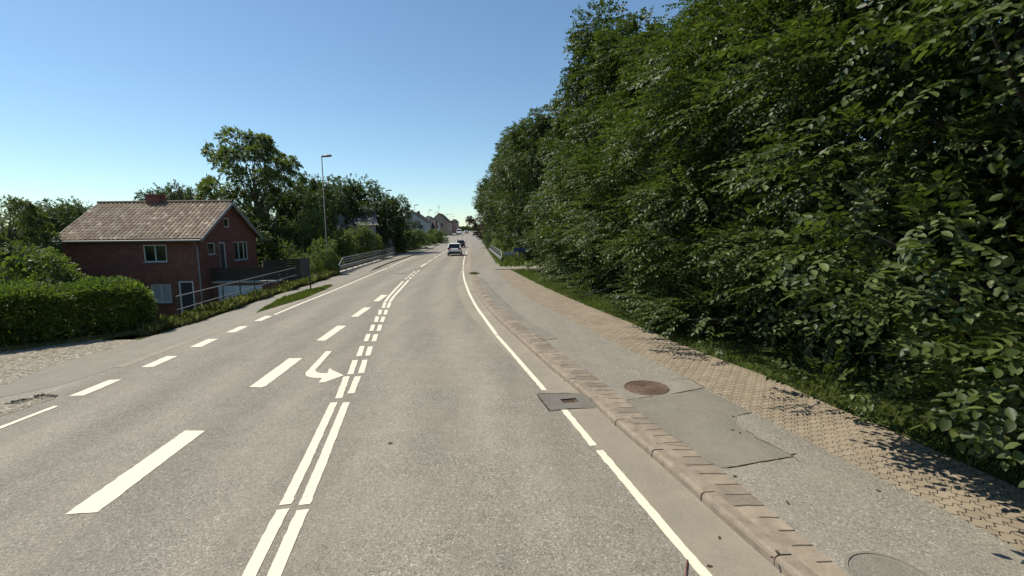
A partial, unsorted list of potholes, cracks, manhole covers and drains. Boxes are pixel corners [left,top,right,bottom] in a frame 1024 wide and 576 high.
crack [726,432,799,468]
manhole cover [624,380,670,395]
manhole cover [843,551,929,576]
